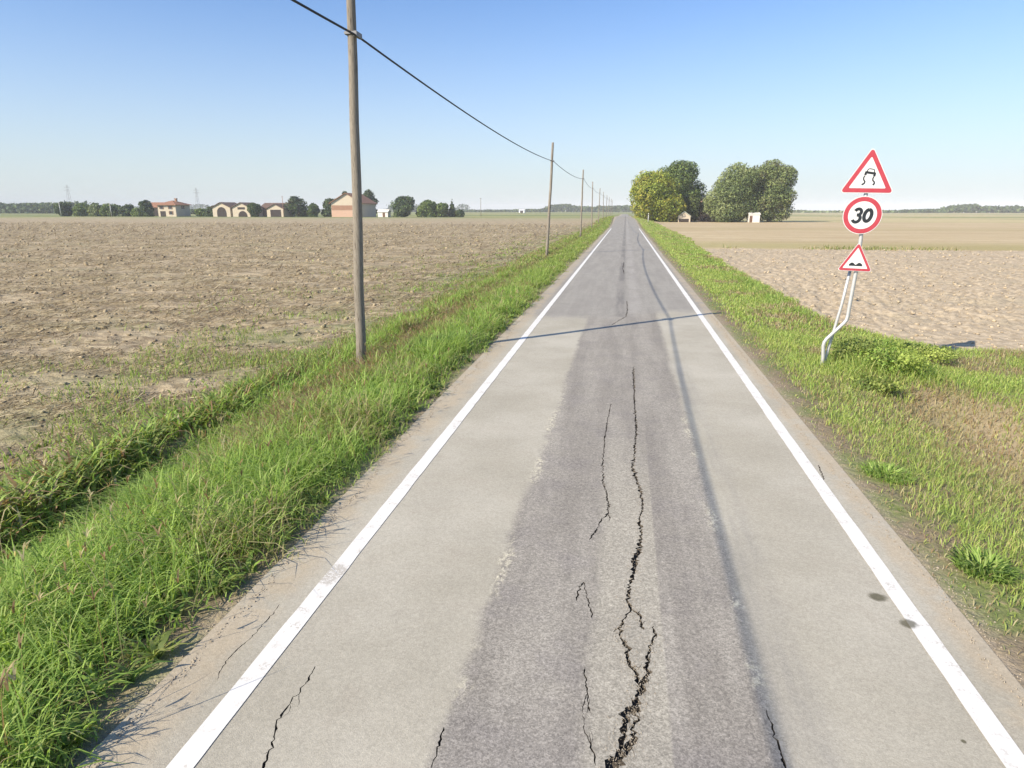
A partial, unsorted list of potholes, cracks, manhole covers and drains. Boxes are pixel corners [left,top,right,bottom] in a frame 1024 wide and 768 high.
crack [766,710,786,768]
crack [218,605,279,678]
crack [431,728,445,768]
crack [262,667,315,768]
crack [576,366,660,768]
